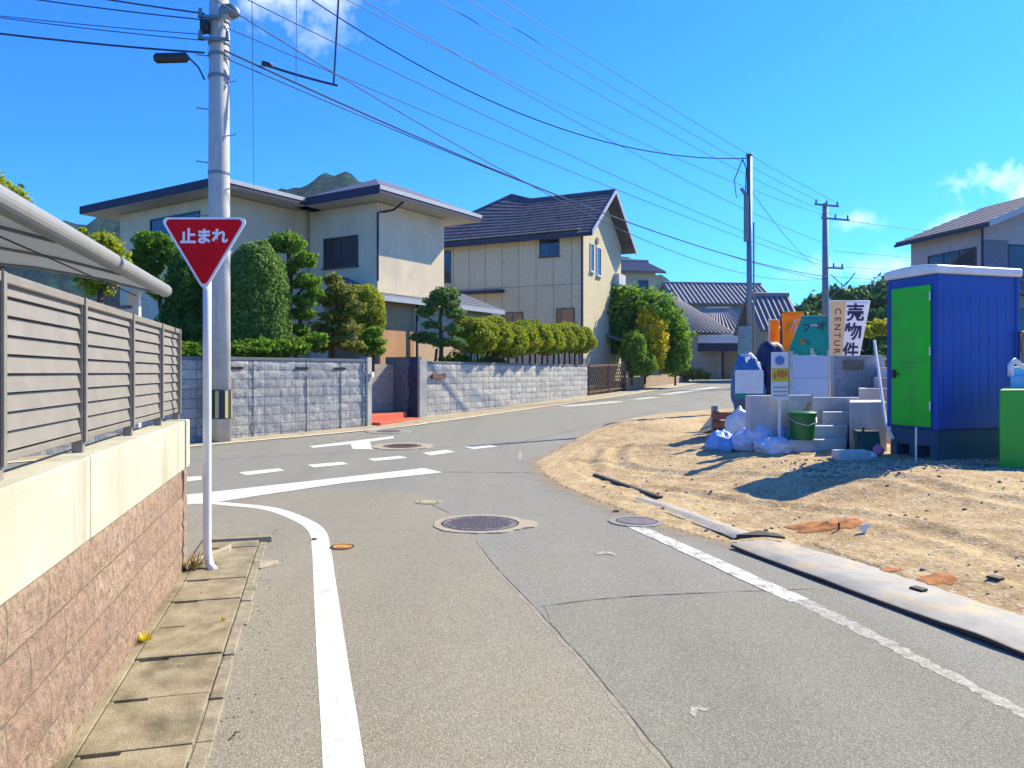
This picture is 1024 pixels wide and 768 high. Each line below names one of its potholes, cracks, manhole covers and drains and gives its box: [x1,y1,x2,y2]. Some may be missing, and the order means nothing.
manhole cover [608,516,664,528]
manhole cover [433,514,537,534]
manhole cover [372,442,433,450]
